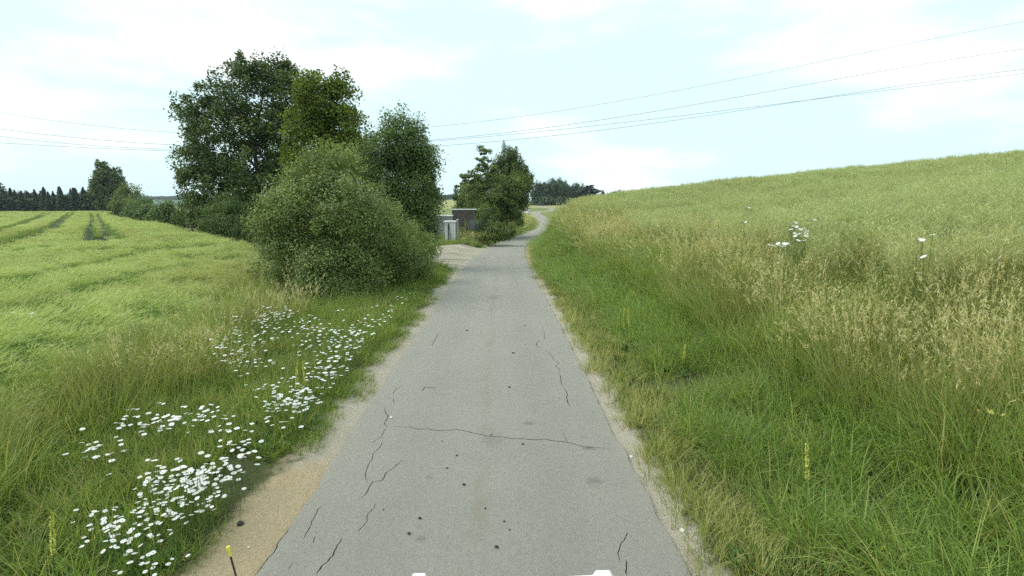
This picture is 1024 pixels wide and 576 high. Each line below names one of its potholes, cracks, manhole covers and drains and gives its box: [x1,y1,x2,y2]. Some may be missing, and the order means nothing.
crack [254,510,342,576]
crack [359,387,595,530]
